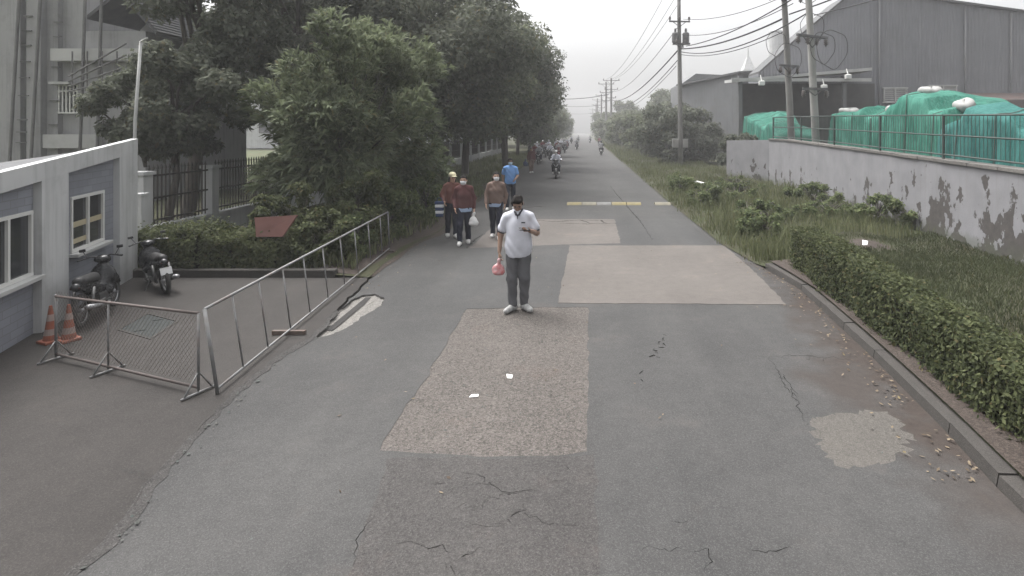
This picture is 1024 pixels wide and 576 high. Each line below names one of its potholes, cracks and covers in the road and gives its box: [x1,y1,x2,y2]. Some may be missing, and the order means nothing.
manhole cover [117,313,179,340]
crack [398,467,574,574]
pothole [317,294,385,338]
